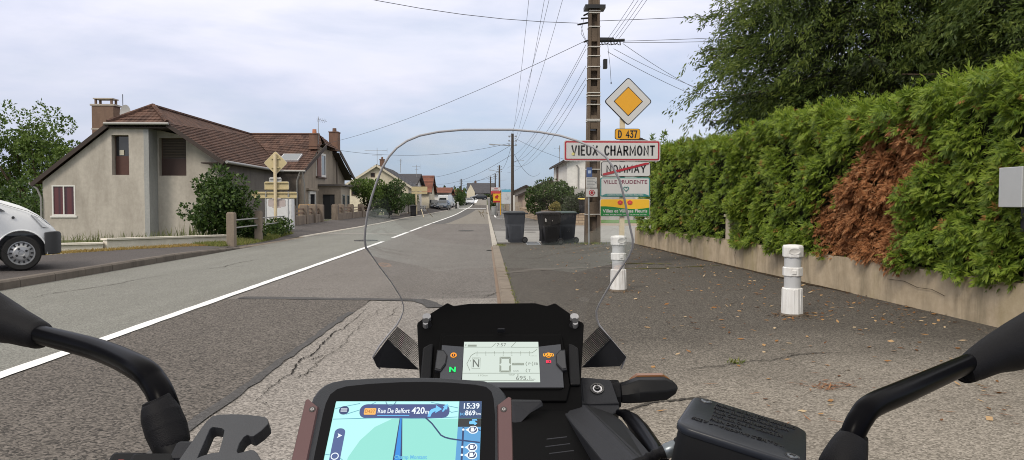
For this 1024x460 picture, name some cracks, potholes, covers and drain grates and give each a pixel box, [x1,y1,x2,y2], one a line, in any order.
crack [690,351,855,370]
crack [256,307,396,404]
